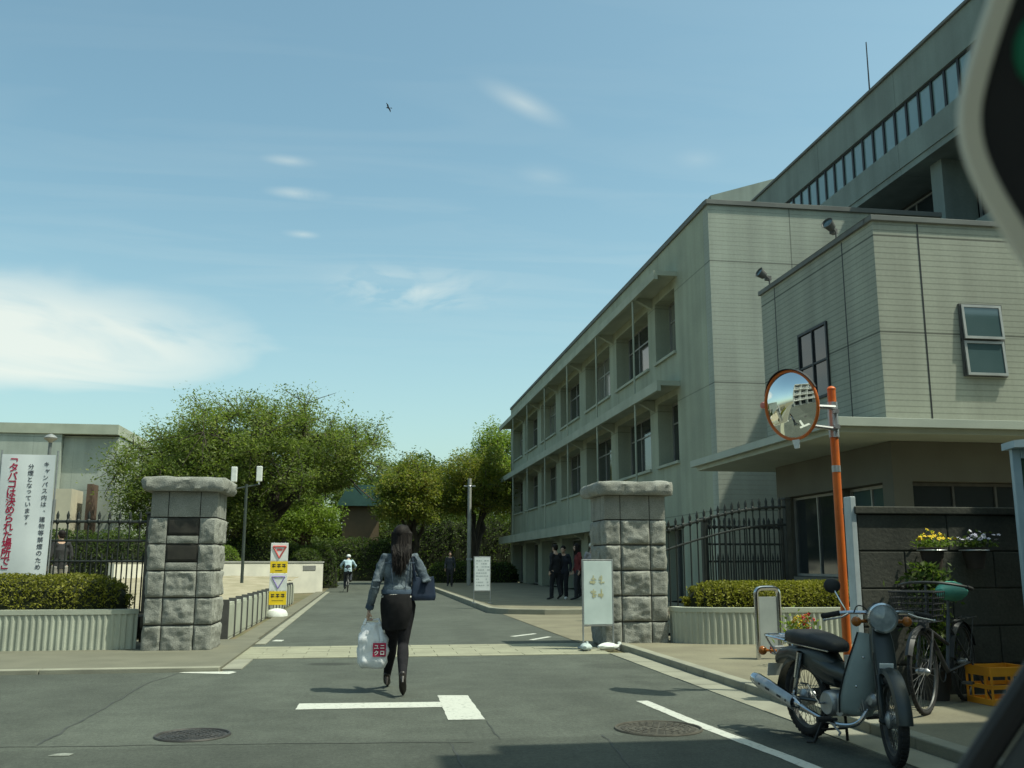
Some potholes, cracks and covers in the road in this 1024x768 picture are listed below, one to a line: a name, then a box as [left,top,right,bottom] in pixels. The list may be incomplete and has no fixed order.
manhole cover [614,720,703,737]
manhole cover [153,728,231,742]
